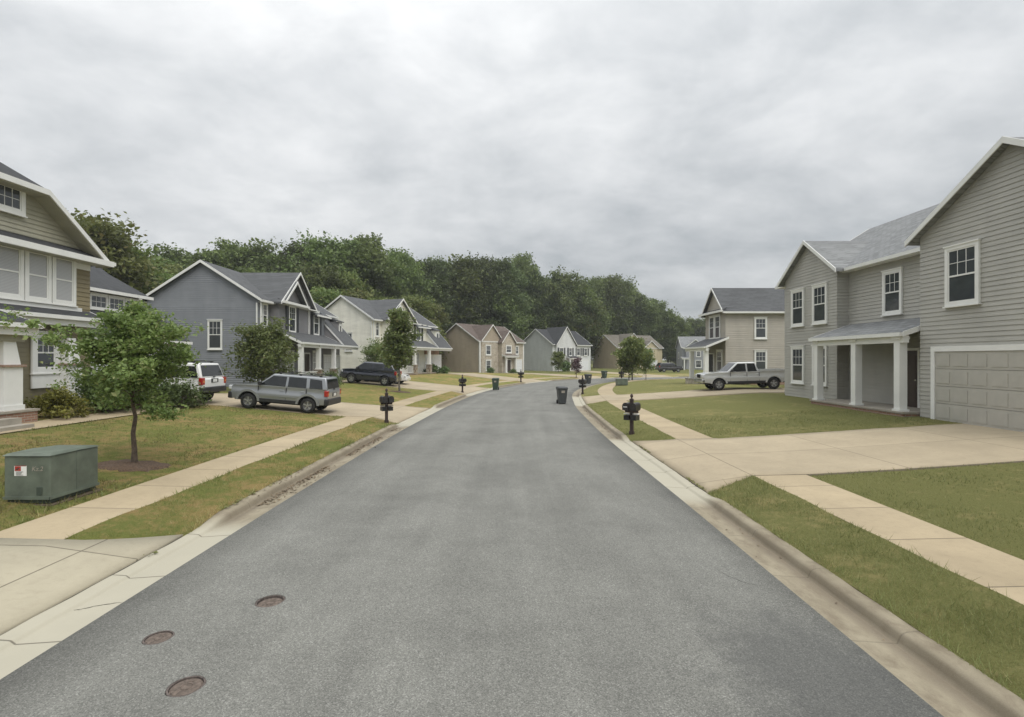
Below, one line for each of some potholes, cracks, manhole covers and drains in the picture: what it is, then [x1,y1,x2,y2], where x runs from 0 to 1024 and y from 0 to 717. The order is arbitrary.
manhole cover [142,630,175,645]
manhole cover [255,595,285,607]
manhole cover [165,675,206,697]
